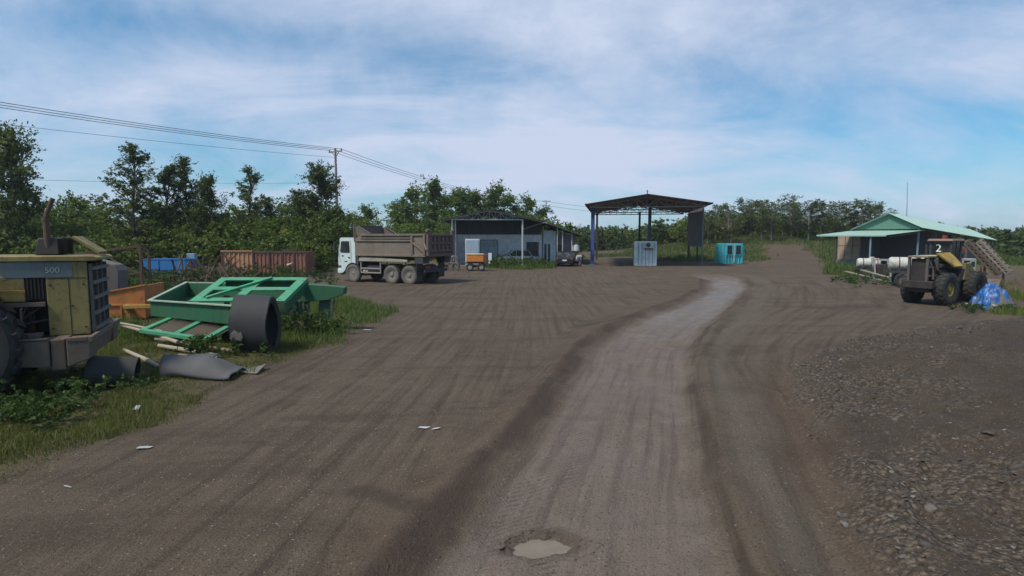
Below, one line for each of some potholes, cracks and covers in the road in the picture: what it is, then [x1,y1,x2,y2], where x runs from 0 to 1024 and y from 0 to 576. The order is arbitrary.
pothole [480,524,605,567]
